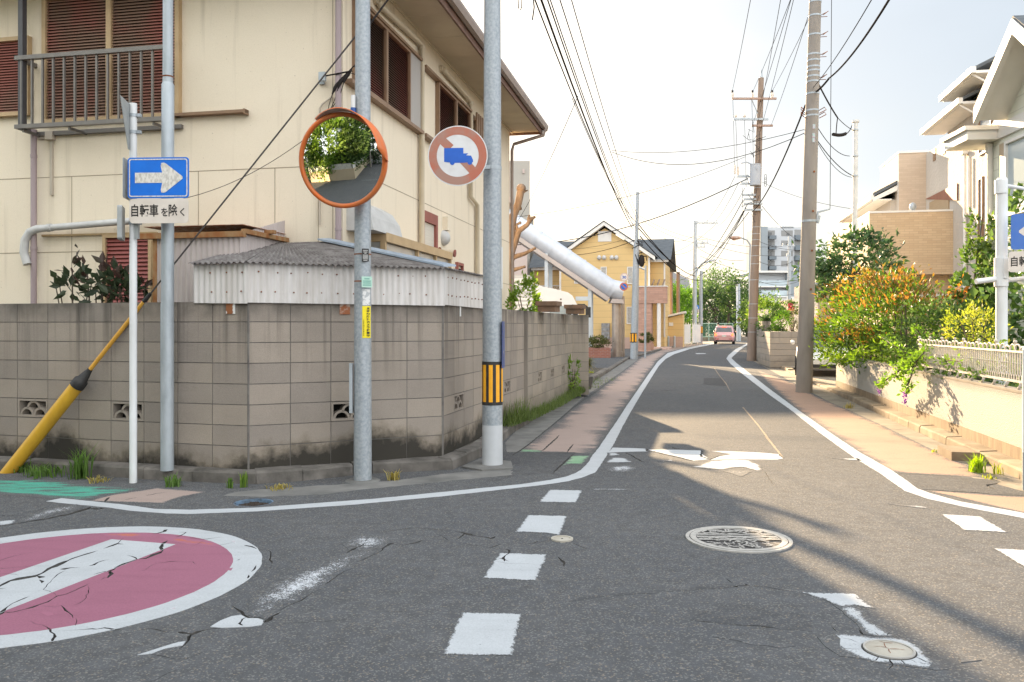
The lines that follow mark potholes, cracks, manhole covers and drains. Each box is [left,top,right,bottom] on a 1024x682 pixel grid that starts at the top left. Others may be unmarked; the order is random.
manhole cover [233,498,274,506]
utility cover [551,535,573,543]
manhole cover [686,526,793,553]
manhole cover [861,639,918,661]
crack [142,606,403,649]
crack [347,528,510,561]
